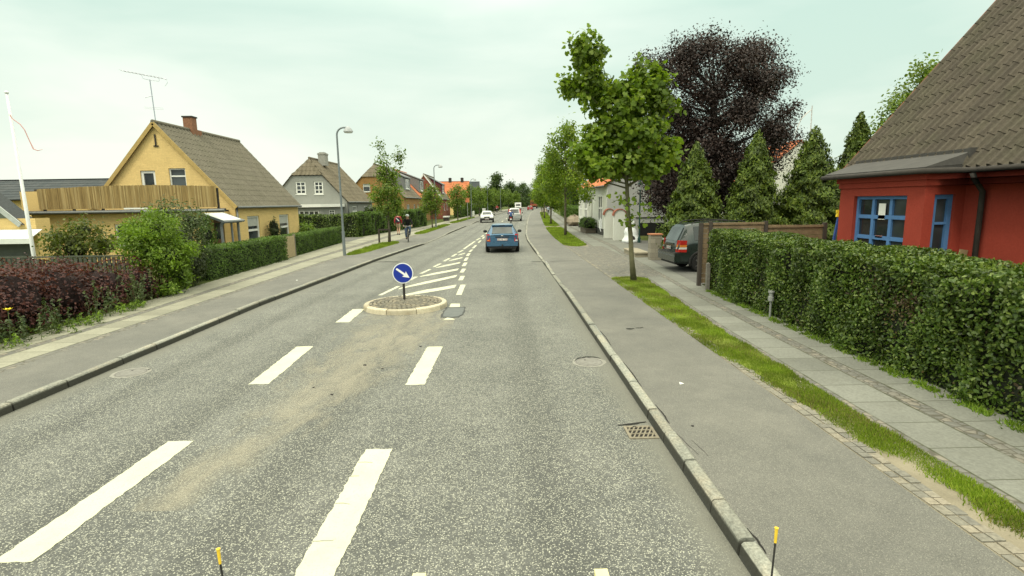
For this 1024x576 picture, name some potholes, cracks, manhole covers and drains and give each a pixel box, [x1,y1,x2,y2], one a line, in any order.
manhole cover [573,358,606,367]
manhole cover [109,367,152,378]
drain grate [623,425,660,439]
